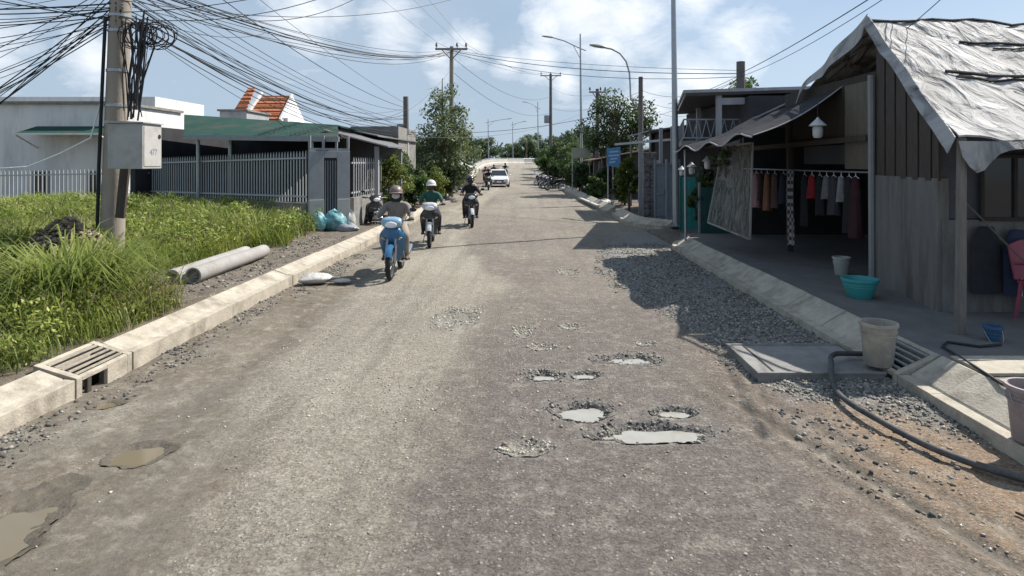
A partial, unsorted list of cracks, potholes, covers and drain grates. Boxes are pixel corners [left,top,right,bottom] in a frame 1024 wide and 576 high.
pothole [538,396,622,423]
pothole [648,404,701,421]
pothole [99,440,179,469]
pothole [527,342,570,351]
pothole [560,418,752,445]
drain grate [33,341,132,399]
pothole [558,322,583,330]
pothole [588,351,668,369]
pothole [85,399,128,410]
pothole [511,322,536,339]
pothole [568,369,604,380]
pothole [494,436,557,457]
